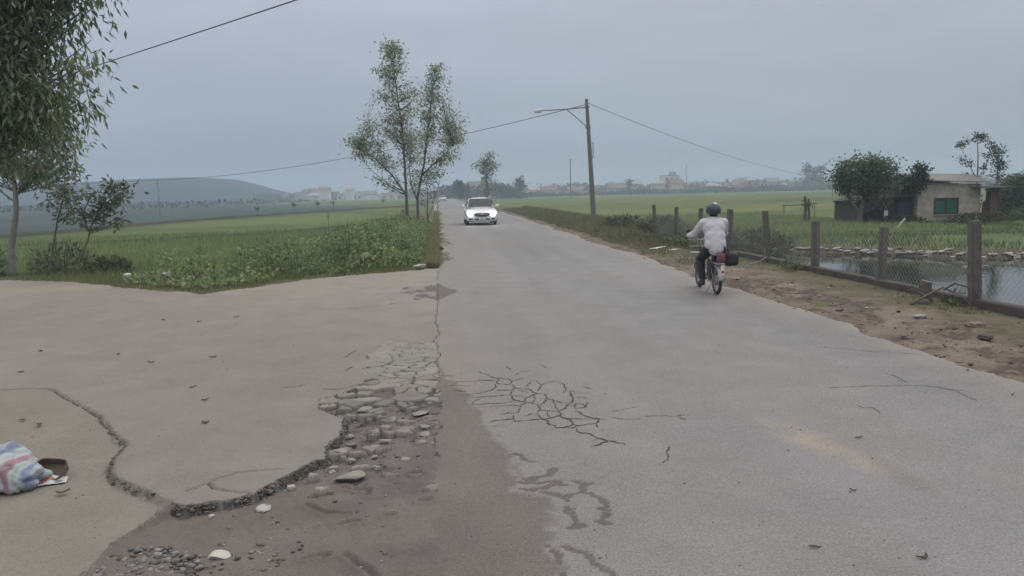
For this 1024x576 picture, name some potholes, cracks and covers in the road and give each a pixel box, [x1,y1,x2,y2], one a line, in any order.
pothole [79,388,450,576]
crack [847,373,977,400]
crack [54,392,156,498]
crack [320,340,686,446]
